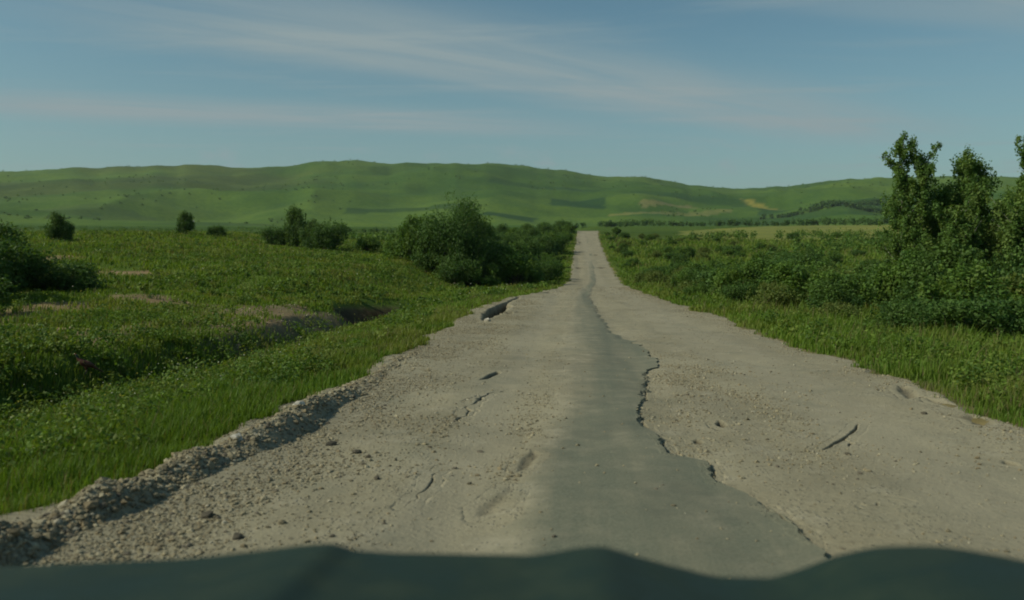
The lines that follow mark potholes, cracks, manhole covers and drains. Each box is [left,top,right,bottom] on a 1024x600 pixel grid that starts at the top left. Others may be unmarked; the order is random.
pothole [471,371,508,382]
crack [634,372,680,456]
crack [439,389,513,427]
pothole [474,296,525,323]
crack [746,494,918,549]
crack [392,465,454,511]
pothole [505,448,551,477]
